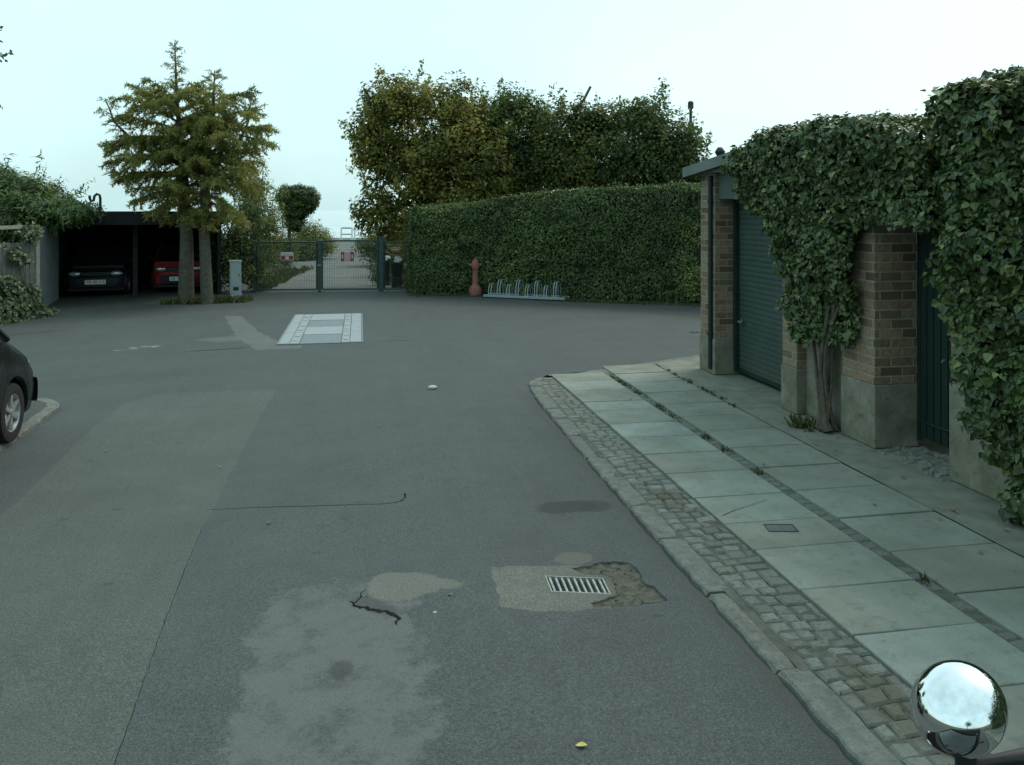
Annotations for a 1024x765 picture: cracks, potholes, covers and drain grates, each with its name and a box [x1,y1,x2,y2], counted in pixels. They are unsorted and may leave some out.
drain grate [545,576,611,594]
crack [351,589,402,625]
pothole [572,561,668,608]
manhole cover [763,524,799,532]
crack [210,494,407,510]
